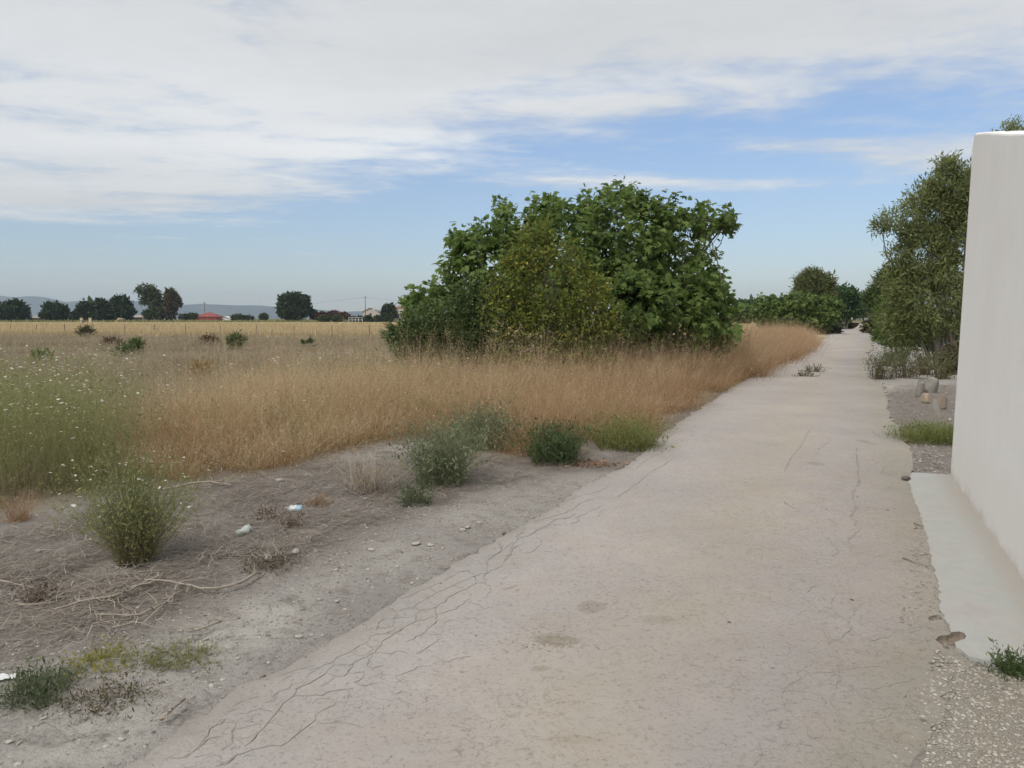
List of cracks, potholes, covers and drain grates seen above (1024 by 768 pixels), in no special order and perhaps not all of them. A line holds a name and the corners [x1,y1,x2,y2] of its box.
crack [826,449,861,556]
crack [533,454,666,533]
crack [172,518,568,766]
